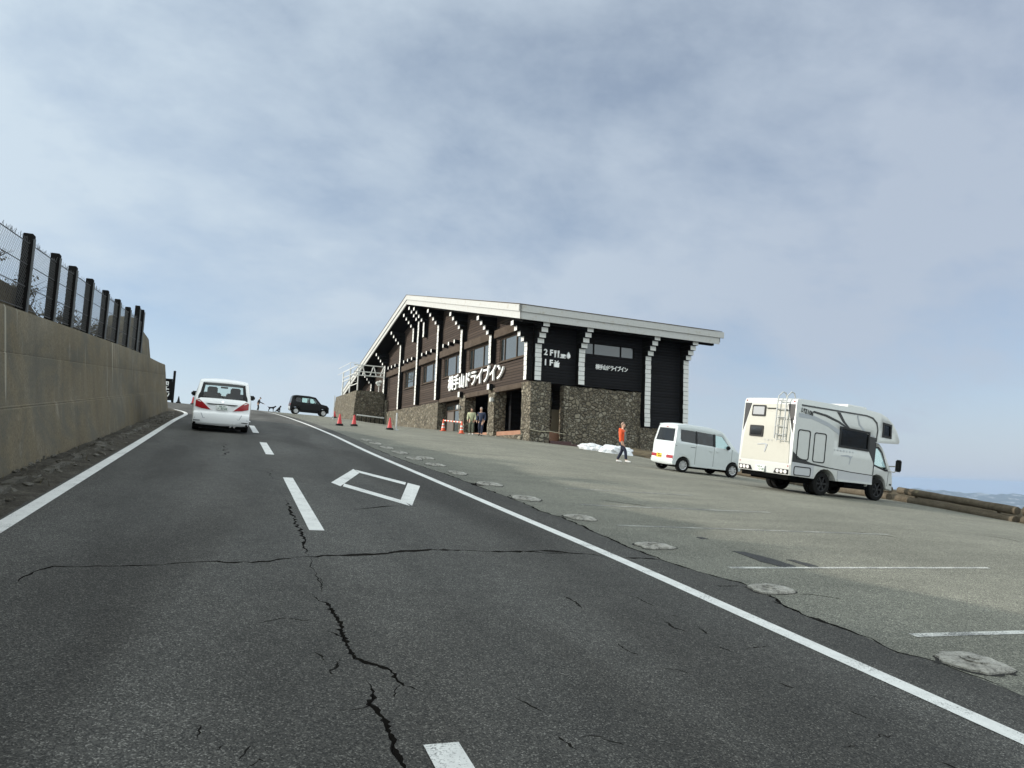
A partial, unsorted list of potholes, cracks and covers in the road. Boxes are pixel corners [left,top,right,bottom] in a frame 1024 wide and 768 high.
crack [627,595,765,651]
crack [18,503,660,768]
